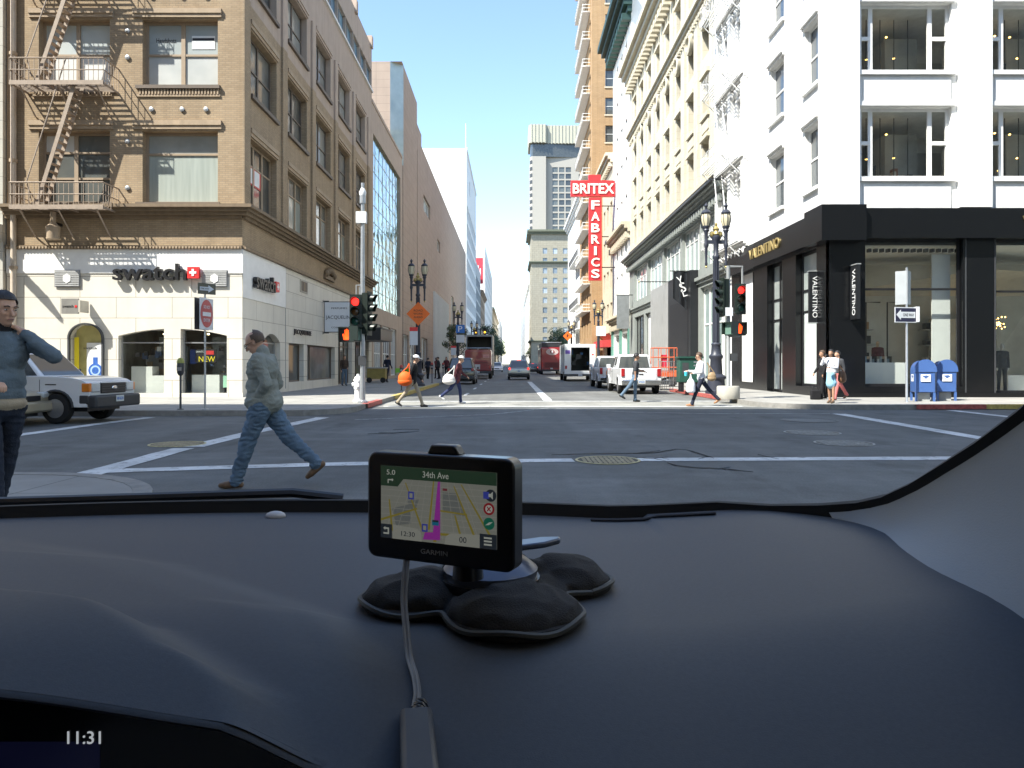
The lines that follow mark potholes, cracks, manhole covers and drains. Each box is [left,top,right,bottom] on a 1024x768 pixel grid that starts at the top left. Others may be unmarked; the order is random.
crack [553,449,777,472]
manhole cover [575,456,641,464]
